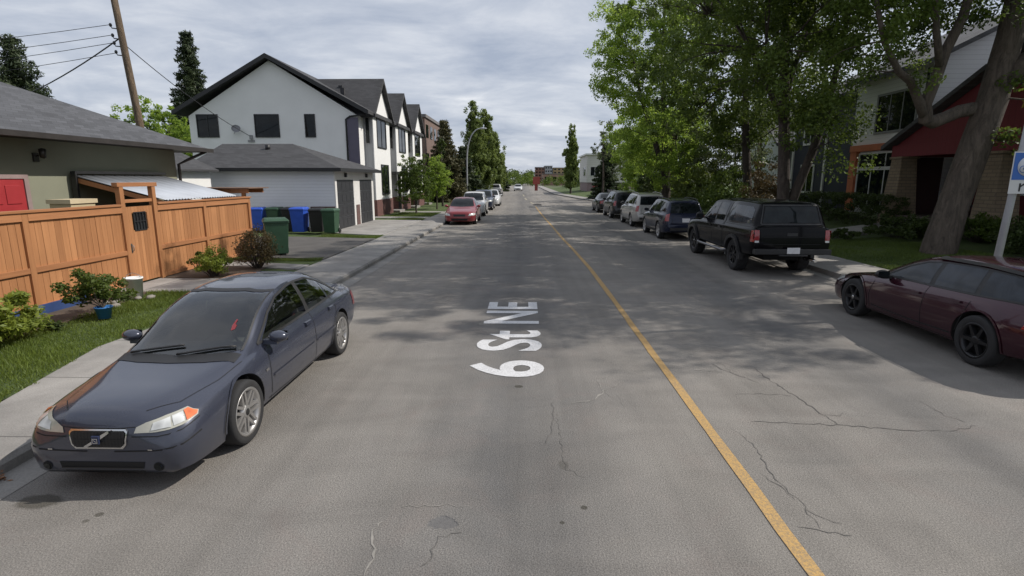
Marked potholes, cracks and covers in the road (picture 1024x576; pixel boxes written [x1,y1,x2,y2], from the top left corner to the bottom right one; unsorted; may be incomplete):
crack [696,361,975,431]
crack [738,432,849,536]
crack [574,373,624,406]
pothole [427,516,458,529]
